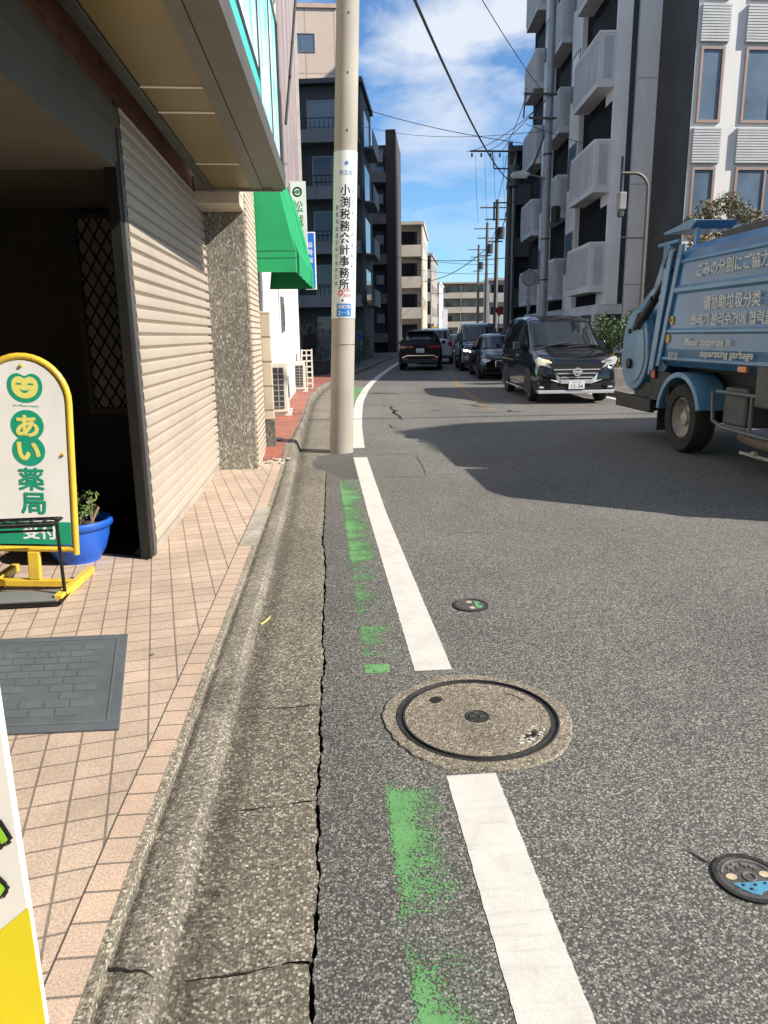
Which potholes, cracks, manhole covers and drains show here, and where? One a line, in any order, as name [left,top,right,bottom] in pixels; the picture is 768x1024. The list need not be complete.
utility cover [712,853,768,905]
manhole cover [381,674,573,772]
crack [186,482,327,1024]
utility cover [453,598,488,612]
